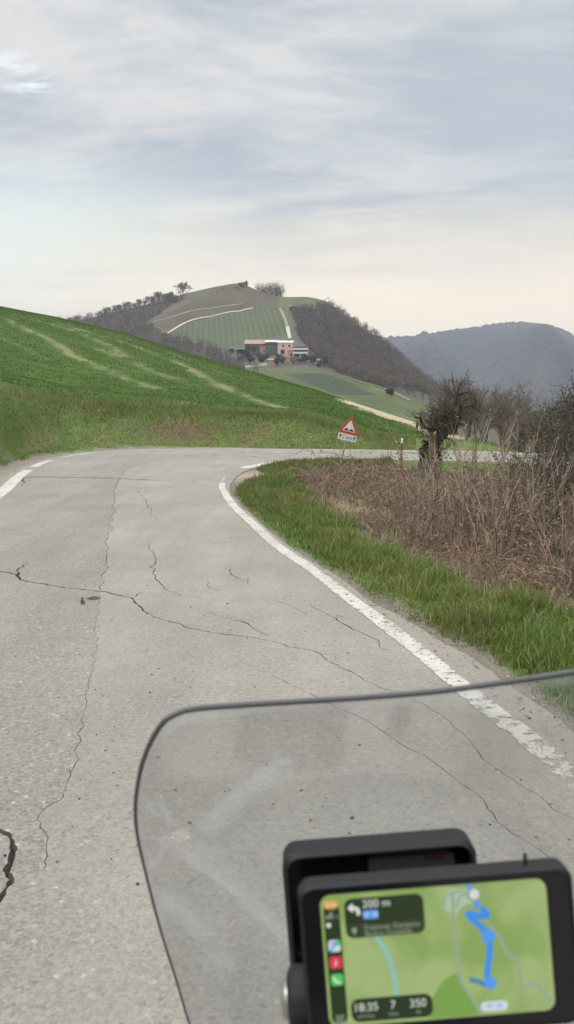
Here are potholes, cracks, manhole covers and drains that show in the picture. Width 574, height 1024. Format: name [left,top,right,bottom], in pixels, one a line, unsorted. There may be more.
crack [1,544,574,858]
crack [0,829,18,903]
